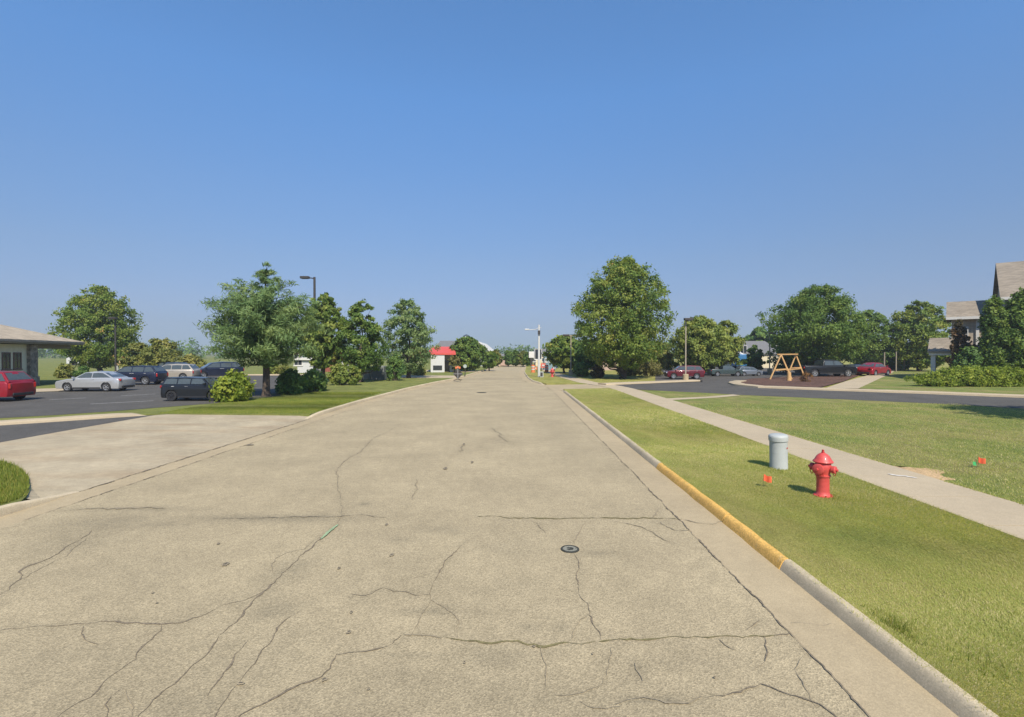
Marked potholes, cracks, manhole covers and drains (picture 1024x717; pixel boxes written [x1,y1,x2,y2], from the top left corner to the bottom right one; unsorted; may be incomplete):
manhole cover [561,545,579,553]
crack [3,530,92,593]
crack [3,590,266,717]
crack [207,548,459,717]
crack [572,522,837,717]
